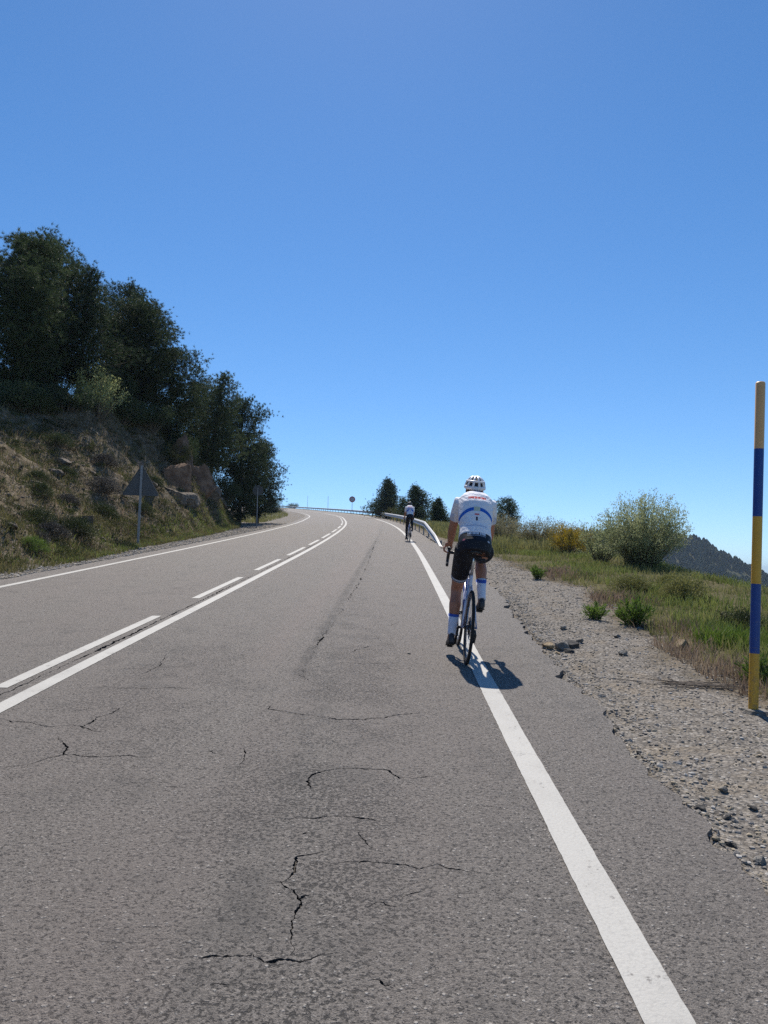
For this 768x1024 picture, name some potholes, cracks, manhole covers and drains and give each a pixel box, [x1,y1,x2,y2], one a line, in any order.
crack [82,657,199,690]
crack [0,707,149,769]
crack [299,543,376,687]
crack [198,816,488,964]
crack [302,768,439,790]
crack [268,706,425,720]
